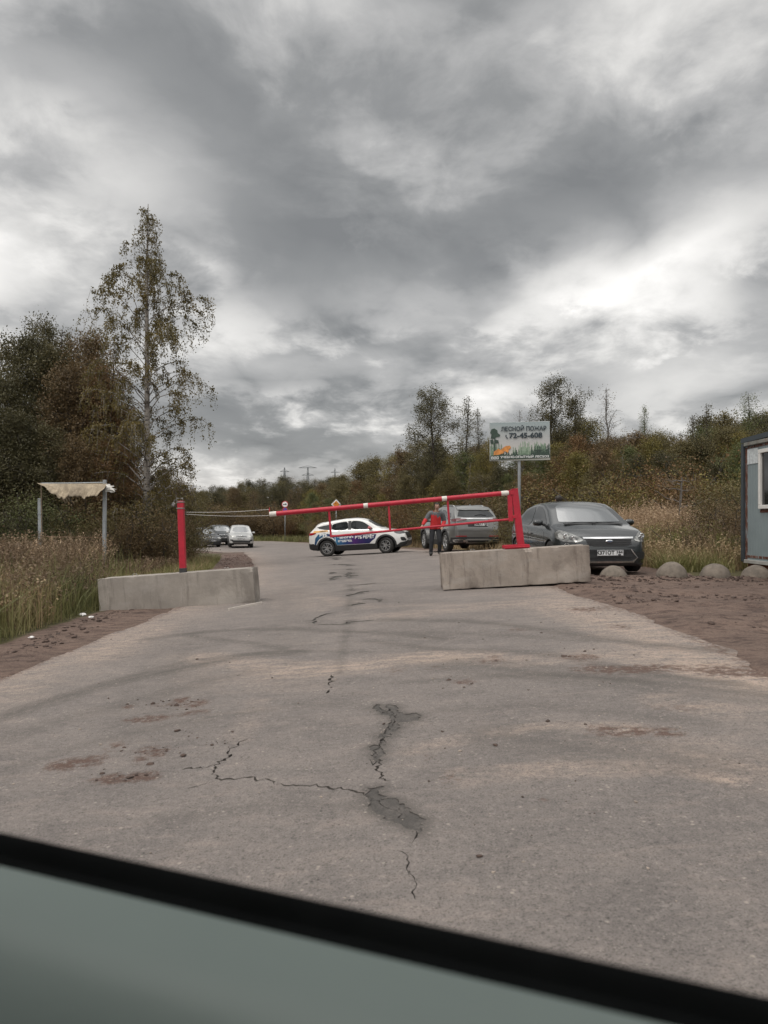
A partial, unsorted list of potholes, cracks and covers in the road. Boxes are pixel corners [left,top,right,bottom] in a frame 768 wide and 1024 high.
crack [185,739,364,795]
crack [398,850,417,899]
crack [312,557,382,625]
